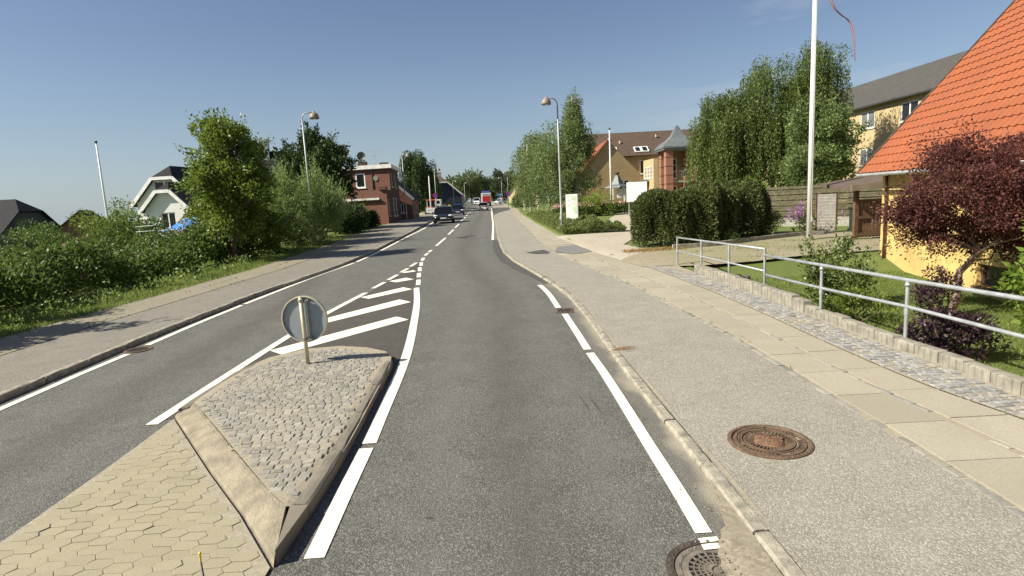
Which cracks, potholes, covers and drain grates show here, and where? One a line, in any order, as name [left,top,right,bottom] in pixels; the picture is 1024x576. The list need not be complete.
manhole cover [727,424,814,460]
